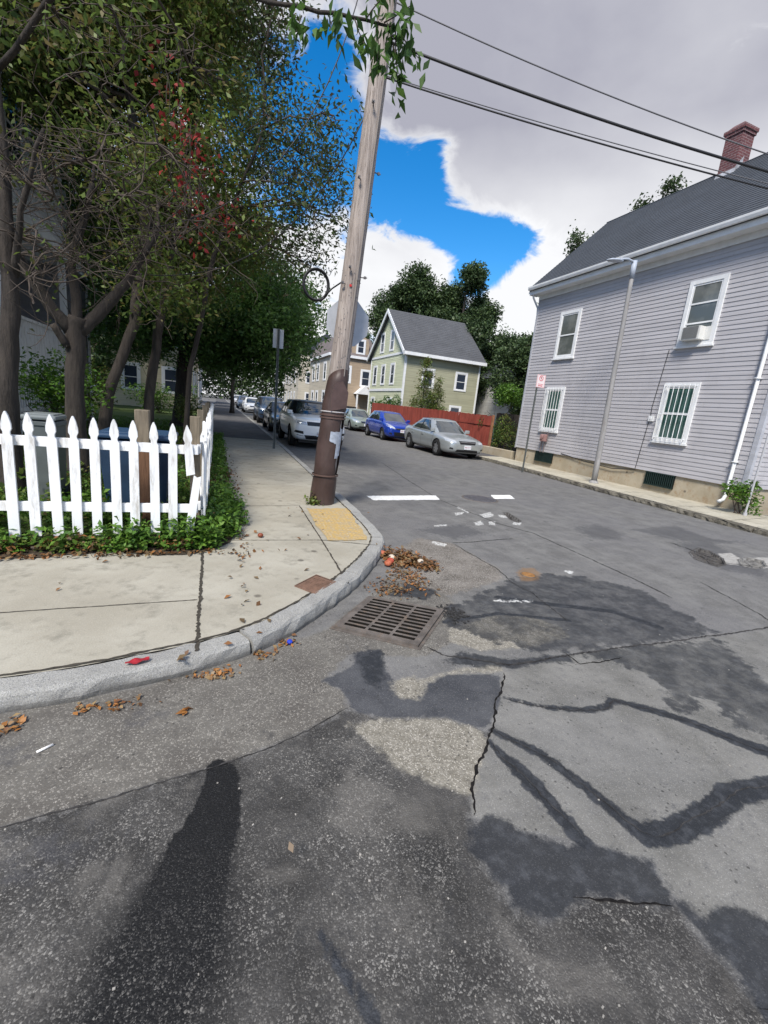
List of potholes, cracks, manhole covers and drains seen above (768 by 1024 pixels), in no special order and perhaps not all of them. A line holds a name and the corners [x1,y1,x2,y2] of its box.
drain grate [330,596,447,650]
pothole [688,547,727,567]
pothole [736,556,768,569]
crack [577,897,671,906]
